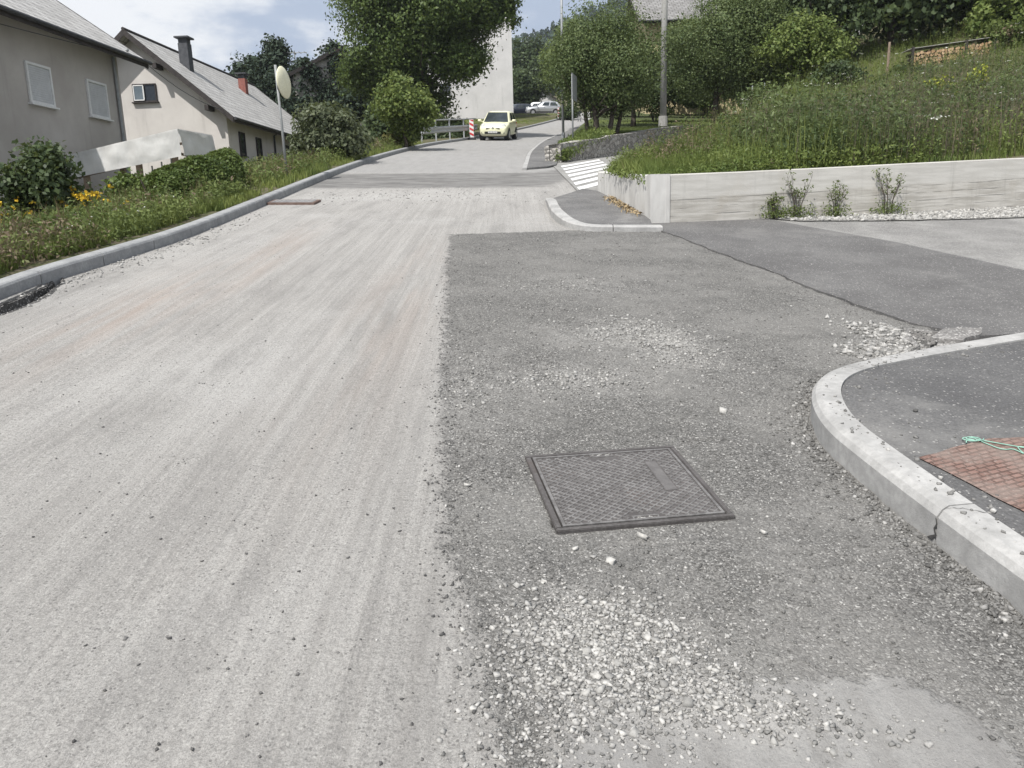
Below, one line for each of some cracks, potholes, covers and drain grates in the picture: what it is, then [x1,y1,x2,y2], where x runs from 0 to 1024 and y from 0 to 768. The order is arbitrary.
manhole cover [525,445,735,535]
